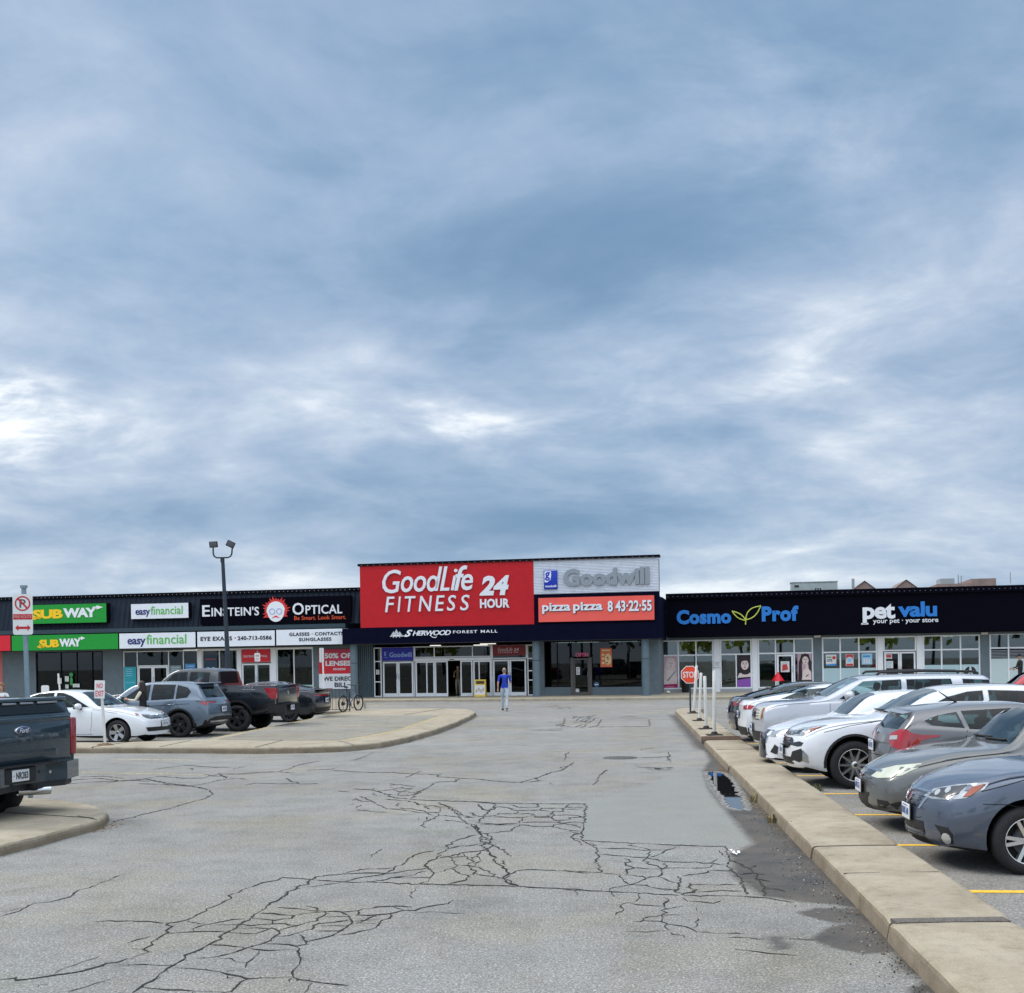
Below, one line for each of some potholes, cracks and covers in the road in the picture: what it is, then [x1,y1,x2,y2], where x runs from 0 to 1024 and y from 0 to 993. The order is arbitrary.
crack [582,840,789,936]
crack [0,877,461,993]
pothole [702,771,752,811]
crack [69,752,588,842]
